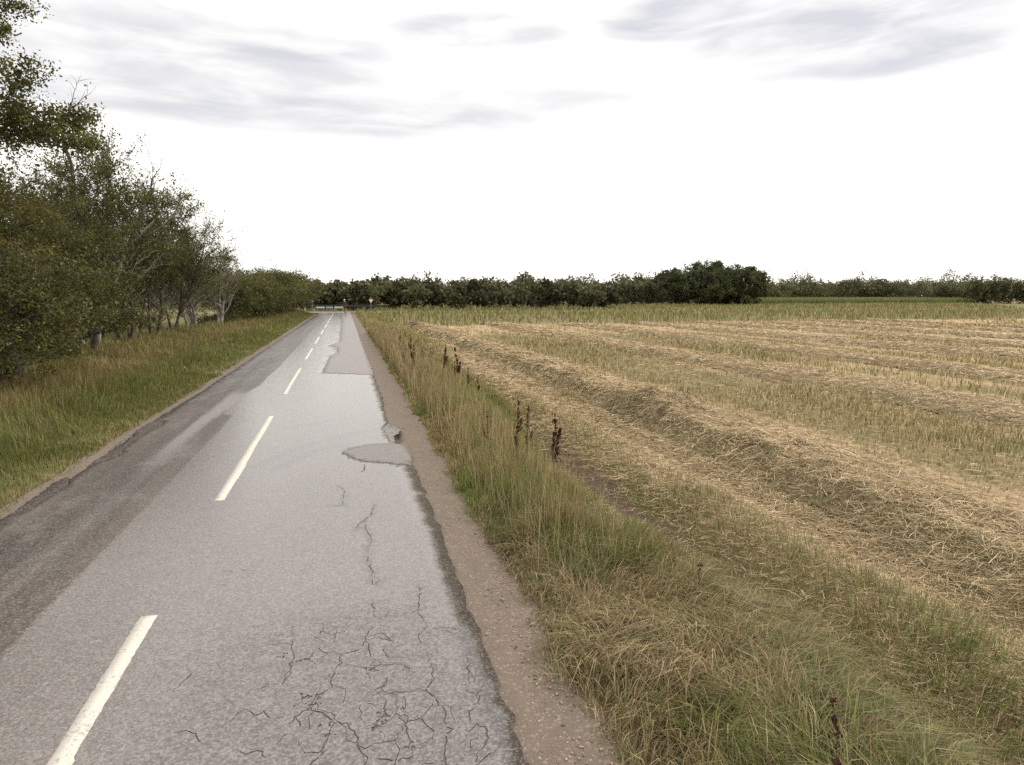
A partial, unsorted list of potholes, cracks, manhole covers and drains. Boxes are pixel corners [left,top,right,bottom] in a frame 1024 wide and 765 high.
crack [356,508,382,585]
crack [225,588,493,765]
pothole [383,424,401,442]
